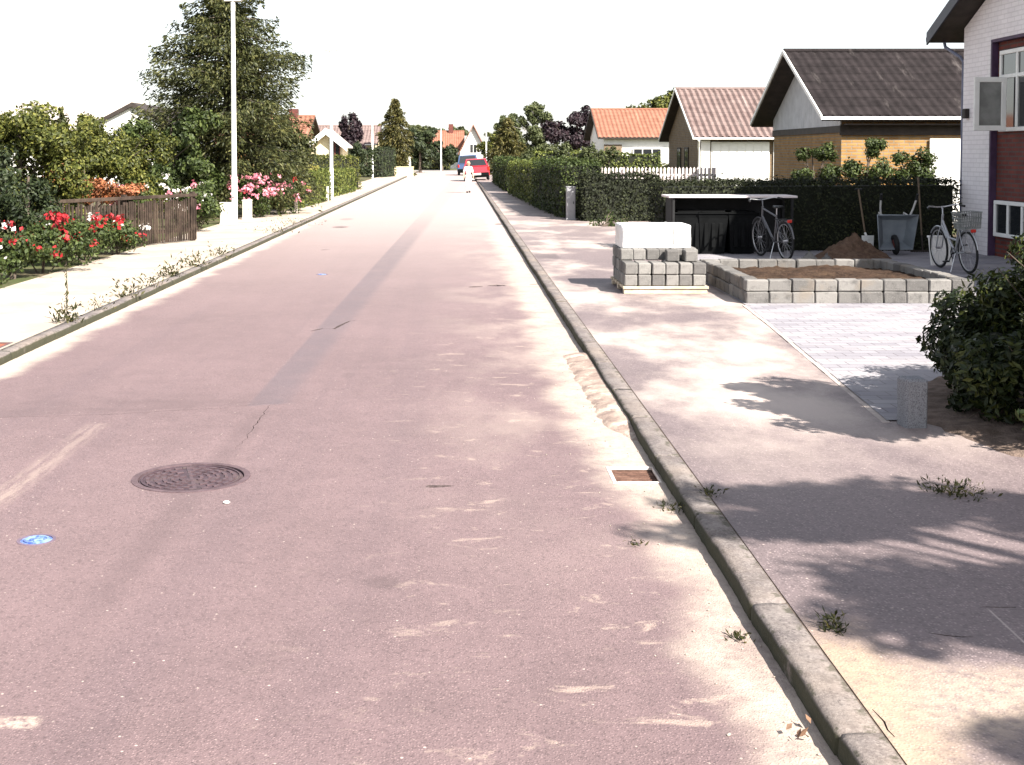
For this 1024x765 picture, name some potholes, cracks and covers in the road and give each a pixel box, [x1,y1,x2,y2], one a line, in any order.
drain grate [606,466,662,483]
crack [29,403,268,444]
manhole cover [131,462,251,493]
